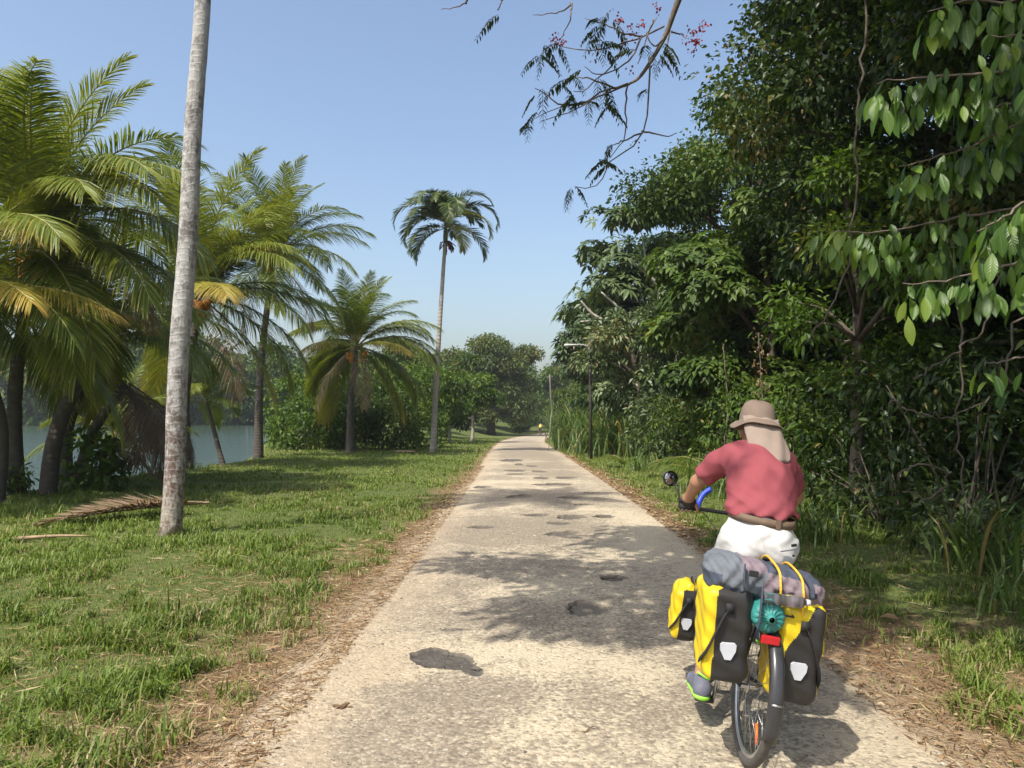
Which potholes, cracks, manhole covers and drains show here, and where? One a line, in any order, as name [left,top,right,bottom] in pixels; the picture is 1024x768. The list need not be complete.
pothole [409,647,485,677]
pothole [565,600,608,617]
